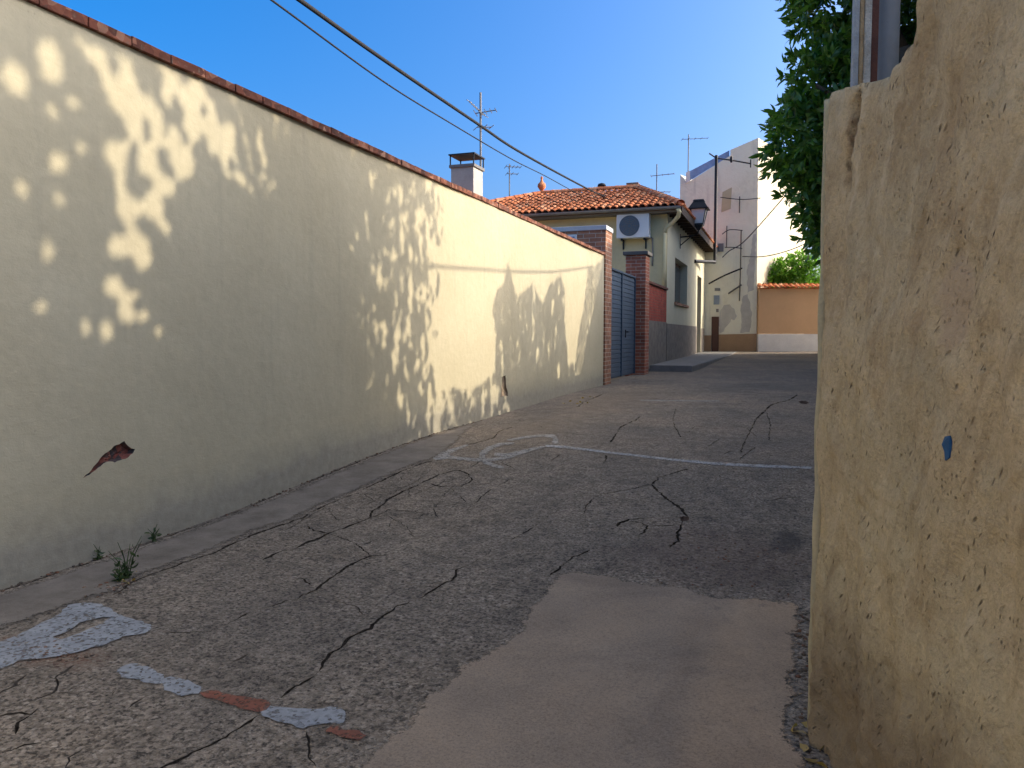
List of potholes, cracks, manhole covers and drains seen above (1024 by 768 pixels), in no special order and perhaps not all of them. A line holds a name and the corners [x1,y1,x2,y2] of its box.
crack [549,469,691,576]
crack [0,665,146,751]
crack [161,716,257,768]
crack [171,461,562,698]
crack [306,732,316,766]
crack [673,395,797,459]
